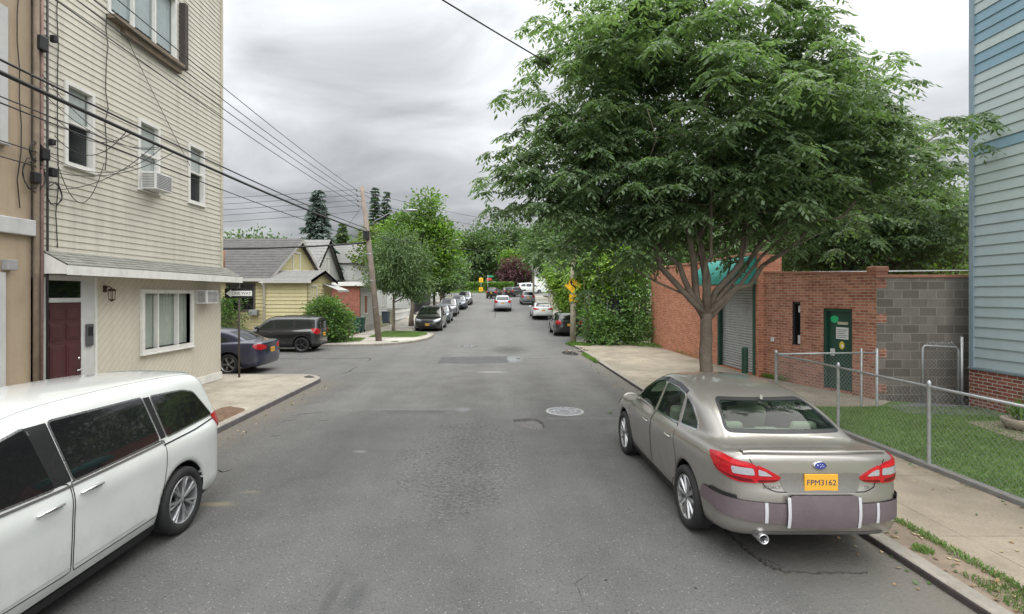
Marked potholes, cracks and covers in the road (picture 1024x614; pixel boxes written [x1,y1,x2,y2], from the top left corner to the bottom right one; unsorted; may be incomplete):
crack [724,529,868,575]
manhole cover [546,407,584,416]
